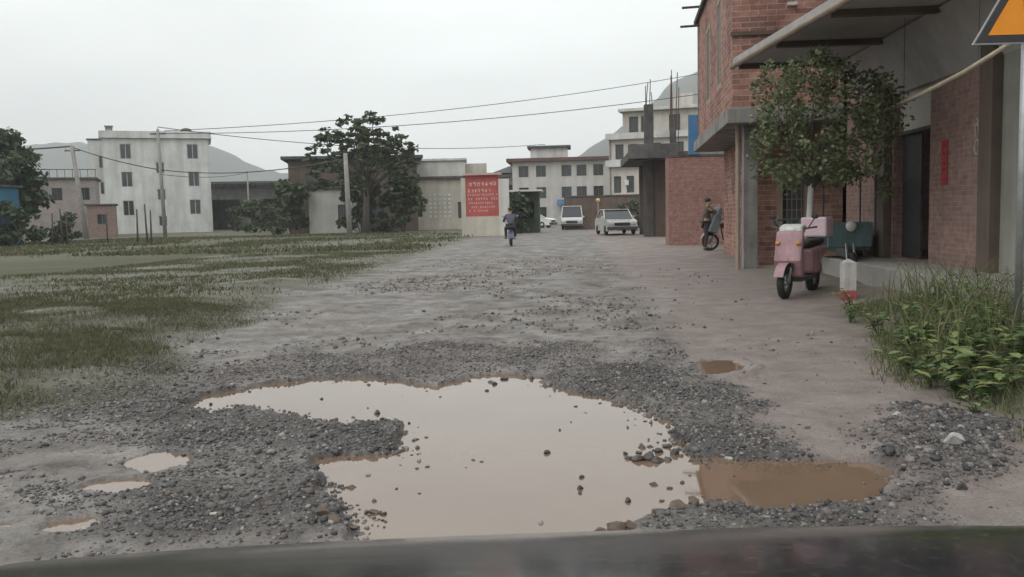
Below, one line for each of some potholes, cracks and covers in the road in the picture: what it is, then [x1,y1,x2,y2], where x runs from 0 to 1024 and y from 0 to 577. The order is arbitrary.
pothole [682,357,750,375]
pothole [174,368,915,541]
pothole [65,472,171,494]
pothole [108,445,208,474]
